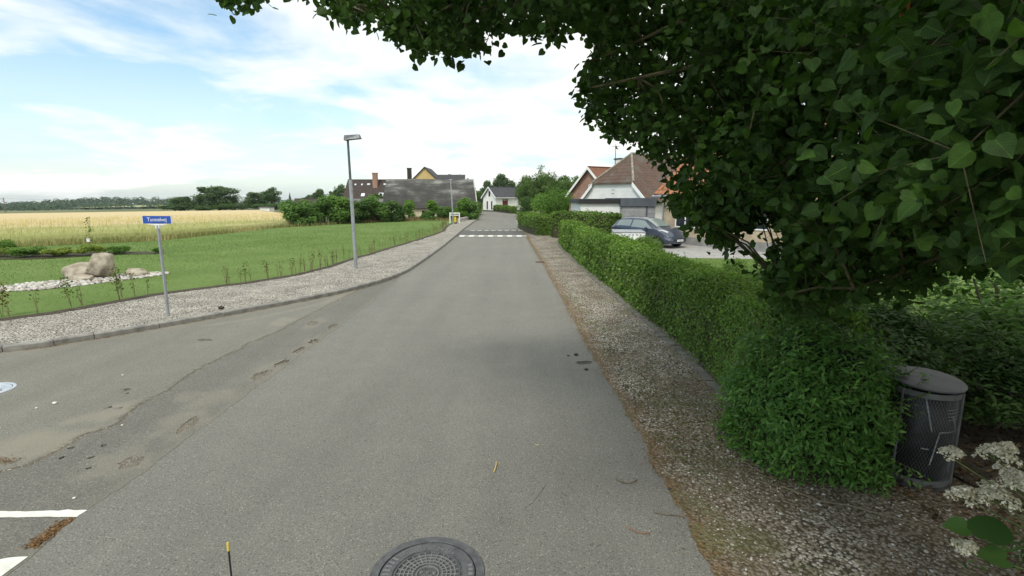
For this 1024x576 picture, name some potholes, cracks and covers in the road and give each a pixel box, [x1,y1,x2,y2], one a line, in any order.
manhole cover [370,537,485,576]
pothole [250,370,273,380]
pothole [176,416,199,434]
pothole [117,455,145,469]
